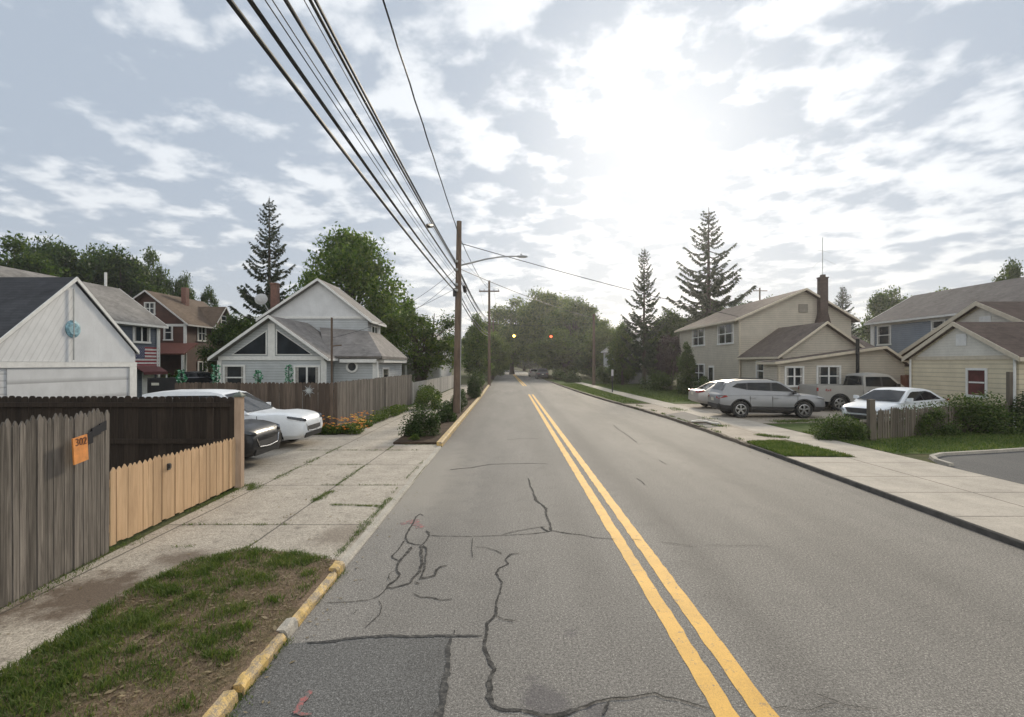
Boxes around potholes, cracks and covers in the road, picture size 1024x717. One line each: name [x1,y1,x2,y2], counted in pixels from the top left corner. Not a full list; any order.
crack [432,463,761,546]
